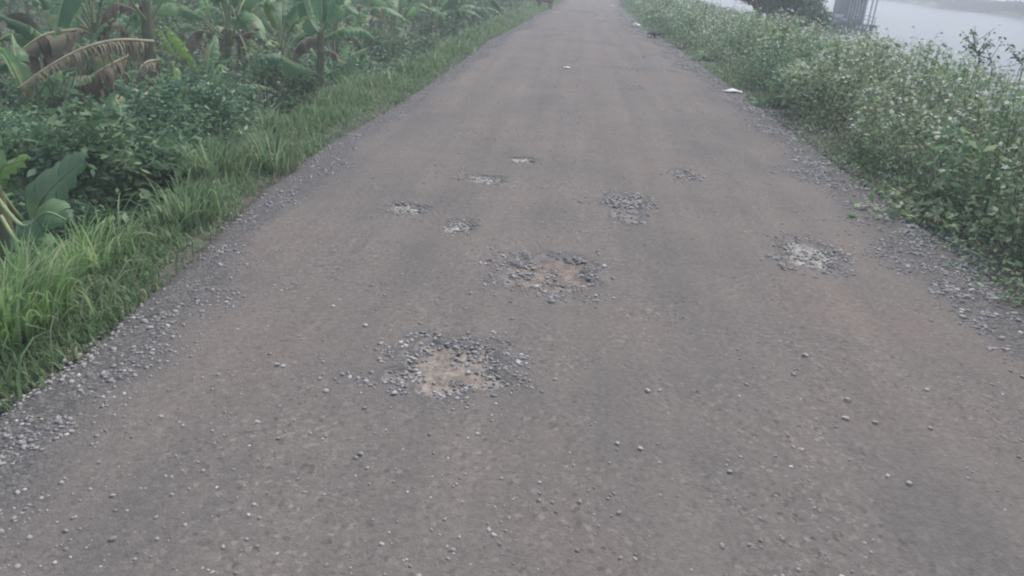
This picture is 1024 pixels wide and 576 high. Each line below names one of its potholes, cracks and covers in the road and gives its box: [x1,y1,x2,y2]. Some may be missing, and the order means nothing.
pothole [504,157,538,165]
pothole [438,218,480,235]
pothole [462,174,508,186]
pothole [382,201,432,216]
pothole [497,251,603,295]
pothole [591,193,649,225]
pothole [775,236,850,276]
pothole [376,337,521,404]
pothole [667,168,699,182]
